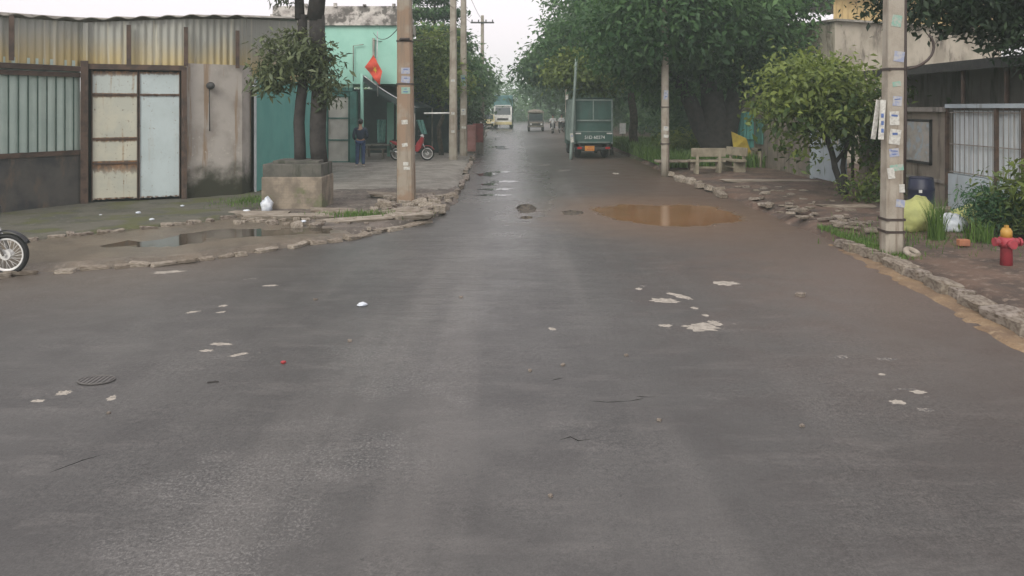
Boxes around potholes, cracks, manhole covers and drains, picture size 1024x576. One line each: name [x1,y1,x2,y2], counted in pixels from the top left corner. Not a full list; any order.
manhole cover [77,375,116,385]
pothole [515,204,537,213]
pothole [588,203,747,227]
